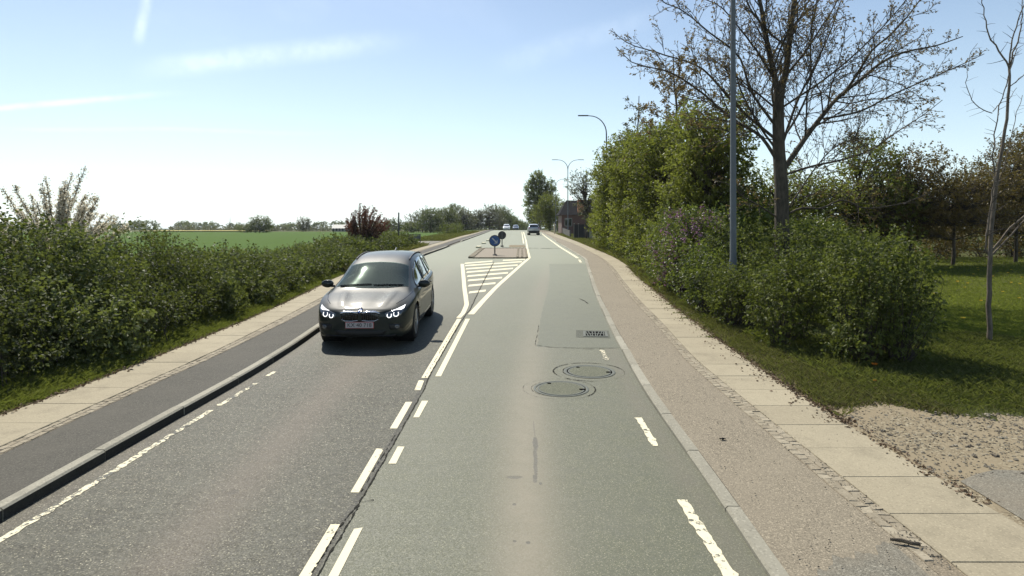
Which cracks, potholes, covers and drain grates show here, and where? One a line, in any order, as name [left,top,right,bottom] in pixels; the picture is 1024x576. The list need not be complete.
manhole cover [553,363,625,381]
manhole cover [523,380,596,399]
drain grate [576,330,610,338]
